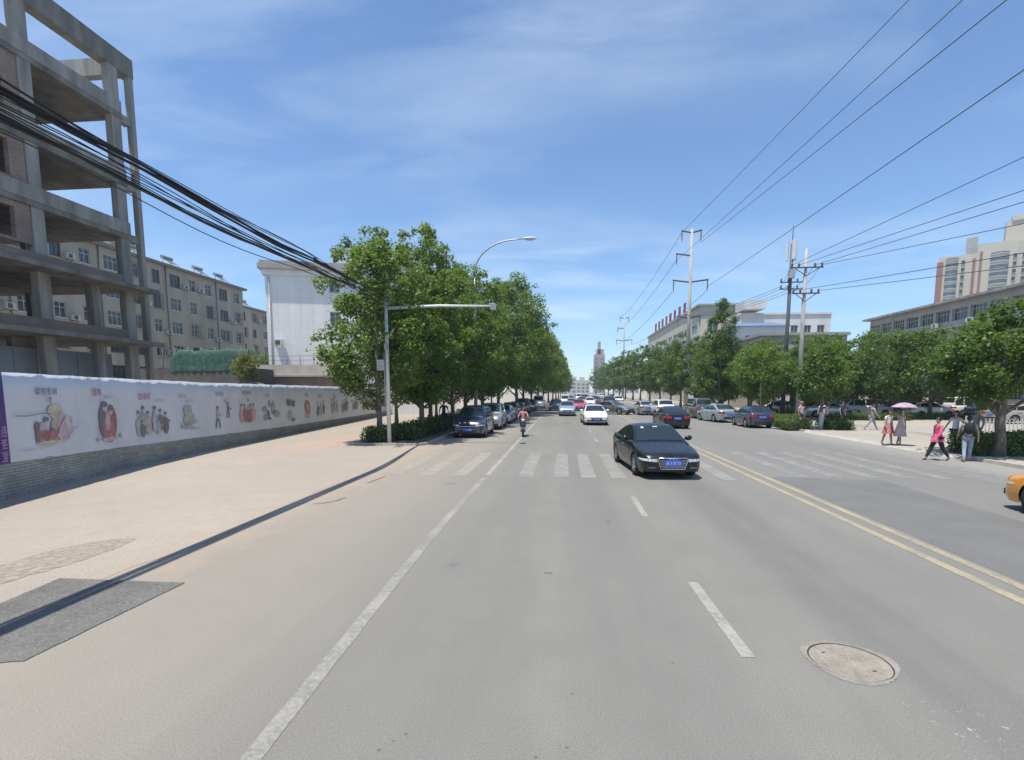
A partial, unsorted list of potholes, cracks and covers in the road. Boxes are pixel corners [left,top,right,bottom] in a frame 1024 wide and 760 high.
manhole cover [799,641,901,686]
